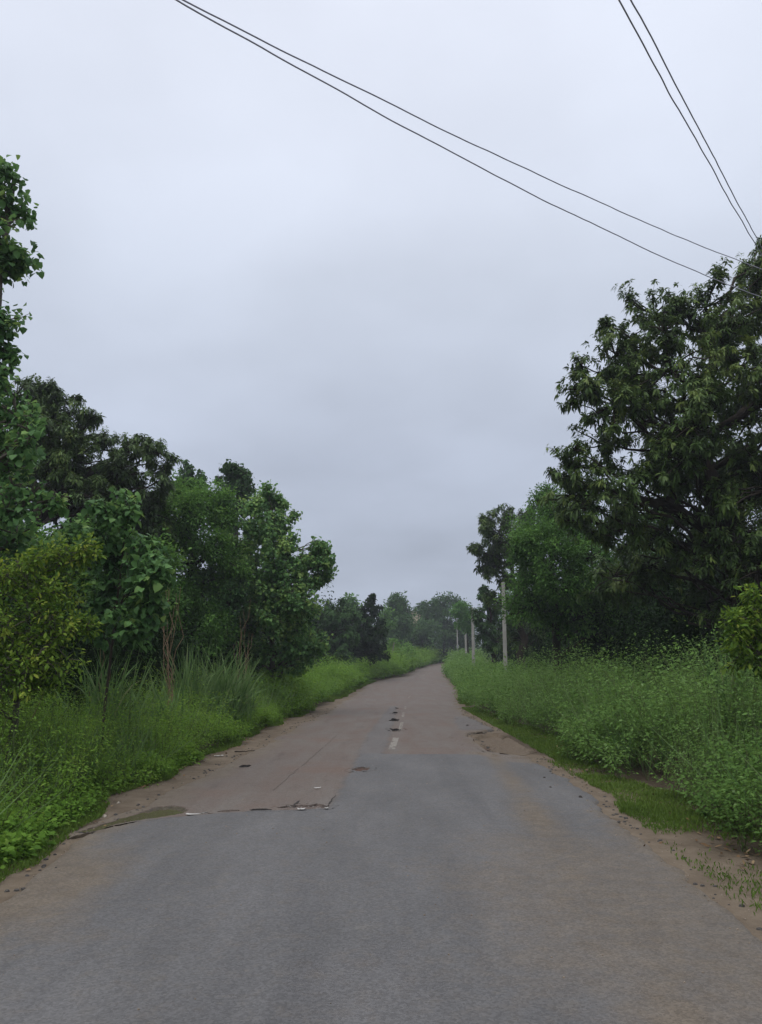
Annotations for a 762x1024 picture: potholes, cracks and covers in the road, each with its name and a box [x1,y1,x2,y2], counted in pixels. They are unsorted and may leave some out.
pothole [65,803,205,838]
crack [275,737,336,807]
